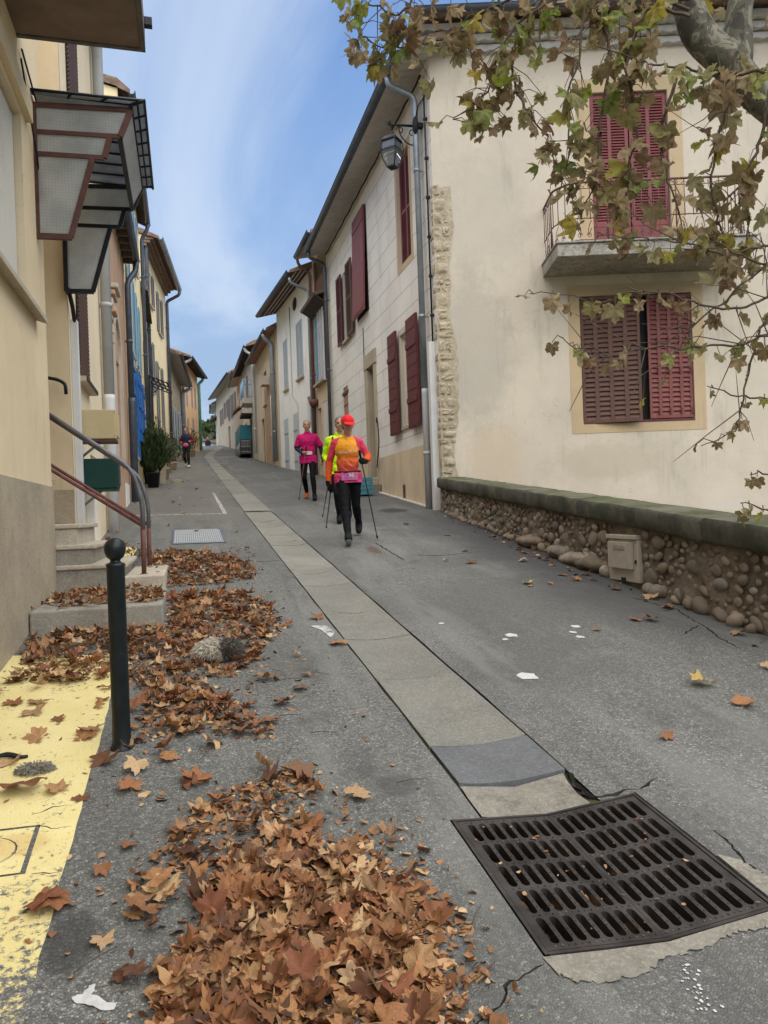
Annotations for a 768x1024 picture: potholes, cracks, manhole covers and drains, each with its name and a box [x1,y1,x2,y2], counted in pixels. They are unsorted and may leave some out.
manhole cover [171,529,226,544]
crack [714,830,764,874]
drain grate [451,793,768,965]
manhole cover [0,827,35,876]
crack [635,598,739,648]
crack [475,964,543,1024]
